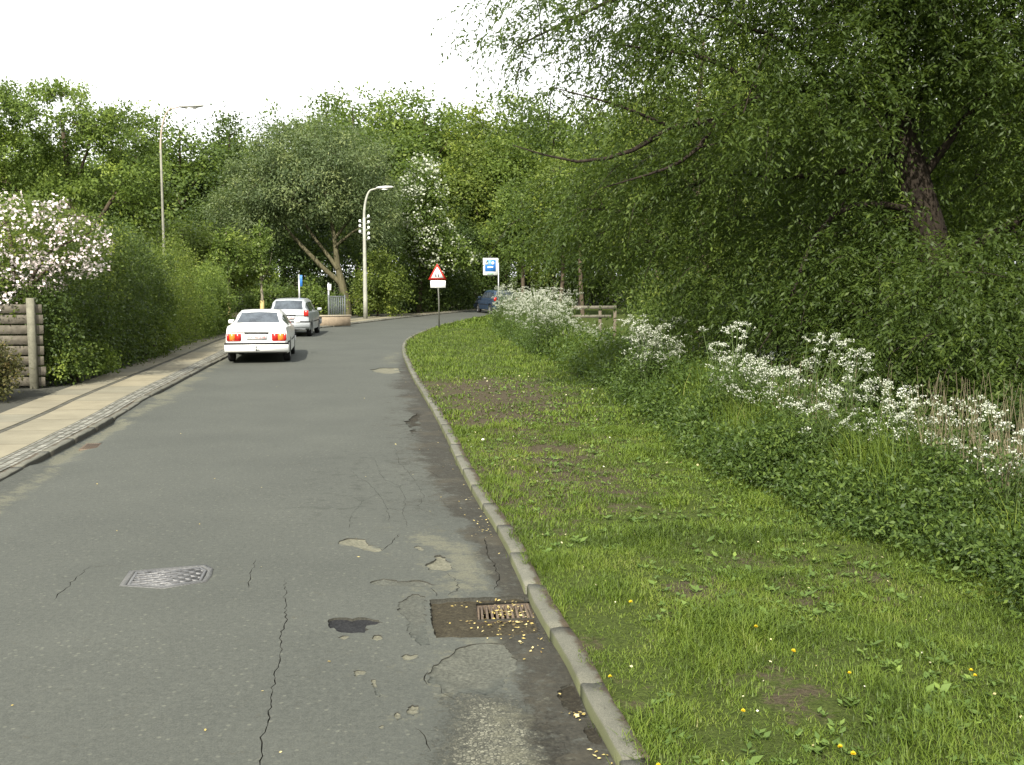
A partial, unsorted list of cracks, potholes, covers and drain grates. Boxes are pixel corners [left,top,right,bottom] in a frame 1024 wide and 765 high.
crack [349,450,445,550]
drain grate [476,603,534,624]
pothole [404,413,422,437]
crack [484,539,500,590]
crack [259,583,288,765]
pothole [425,555,452,571]
pothole [327,617,383,633]
manhole cover [119,565,213,589]
pothole [338,538,382,552]
